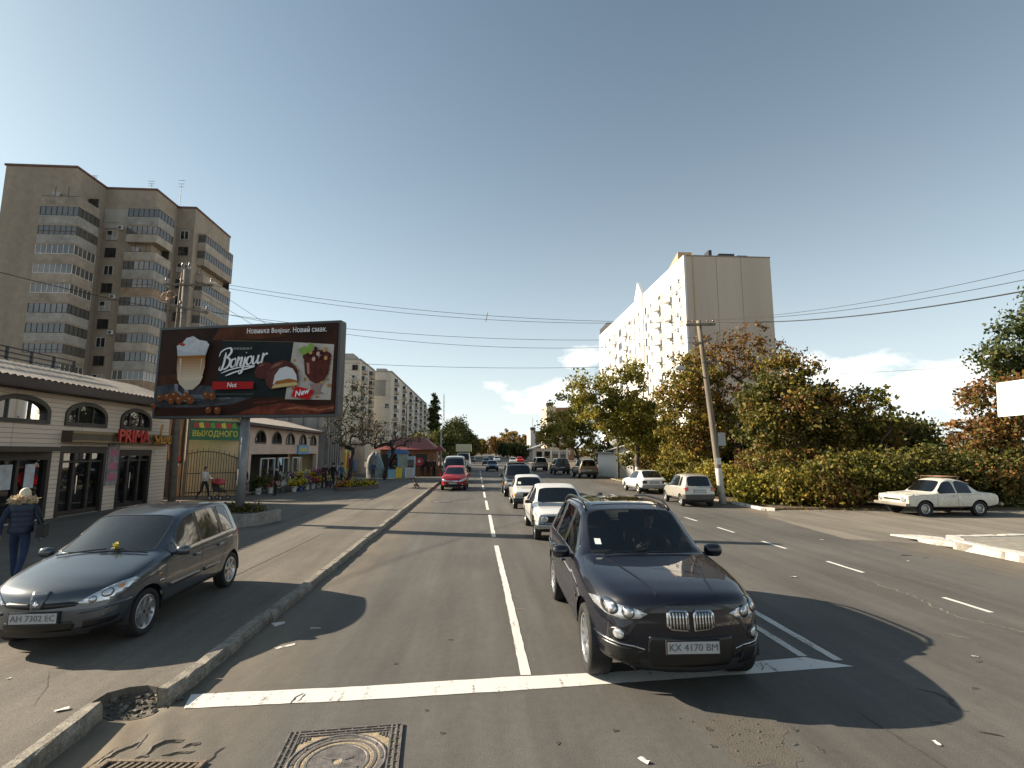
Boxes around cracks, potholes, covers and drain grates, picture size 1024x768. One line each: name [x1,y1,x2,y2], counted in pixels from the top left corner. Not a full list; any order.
crack [87,733,226,768]
manhole cover [271,722,403,768]
drain grate [95,758,208,768]
pothole [102,692,184,721]
